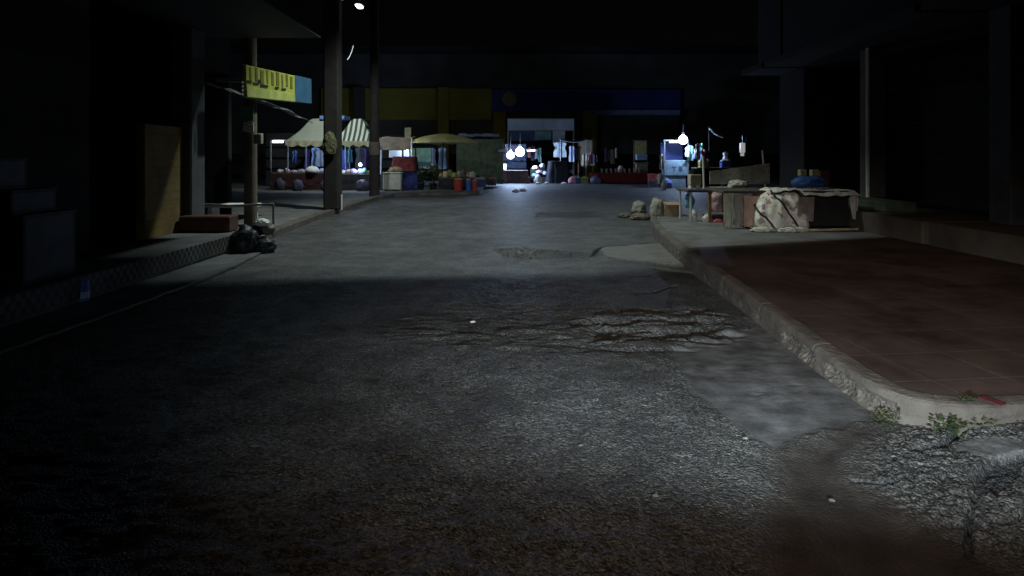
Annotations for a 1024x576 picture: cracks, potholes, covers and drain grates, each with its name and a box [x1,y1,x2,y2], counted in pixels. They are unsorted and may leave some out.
crack [529,243,741,353]
crack [851,473,1024,559]
crack [907,430,960,453]
pothole [491,247,596,260]
